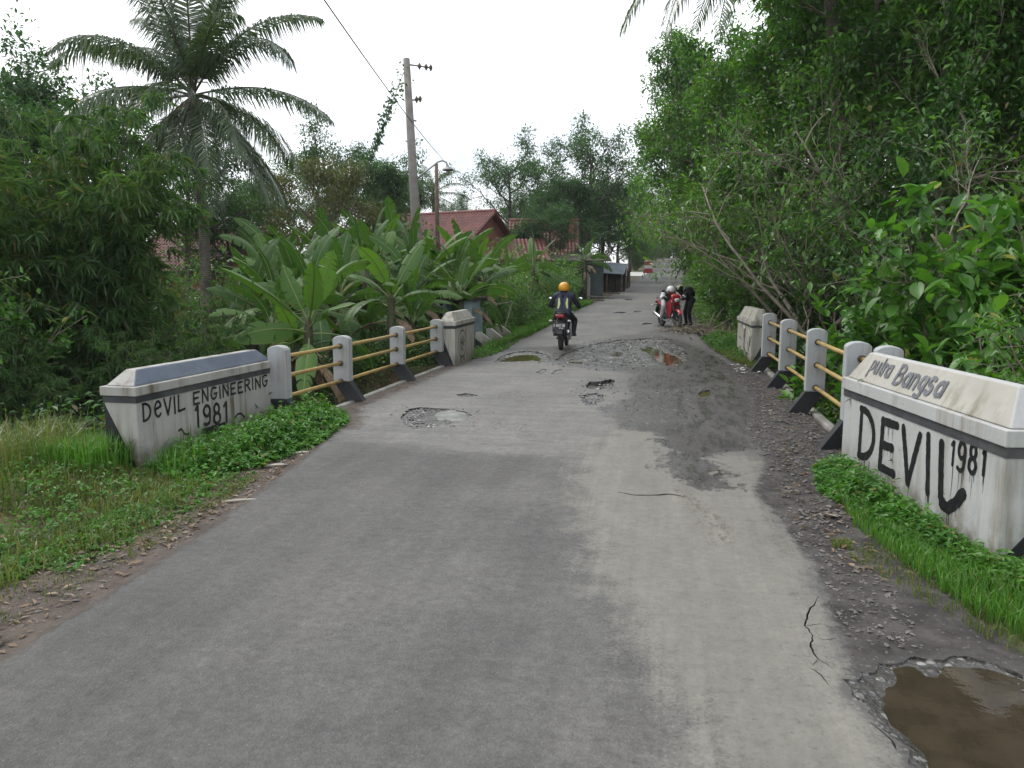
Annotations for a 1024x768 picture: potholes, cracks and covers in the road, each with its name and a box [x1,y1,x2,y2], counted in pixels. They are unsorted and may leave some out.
pothole [580,393,604,406]
pothole [400,407,472,429]
pothole [585,379,615,390]
pothole [556,338,690,368]
crack [804,596,835,685]
pothole [843,655,1024,768]
pothole [495,351,551,362]
